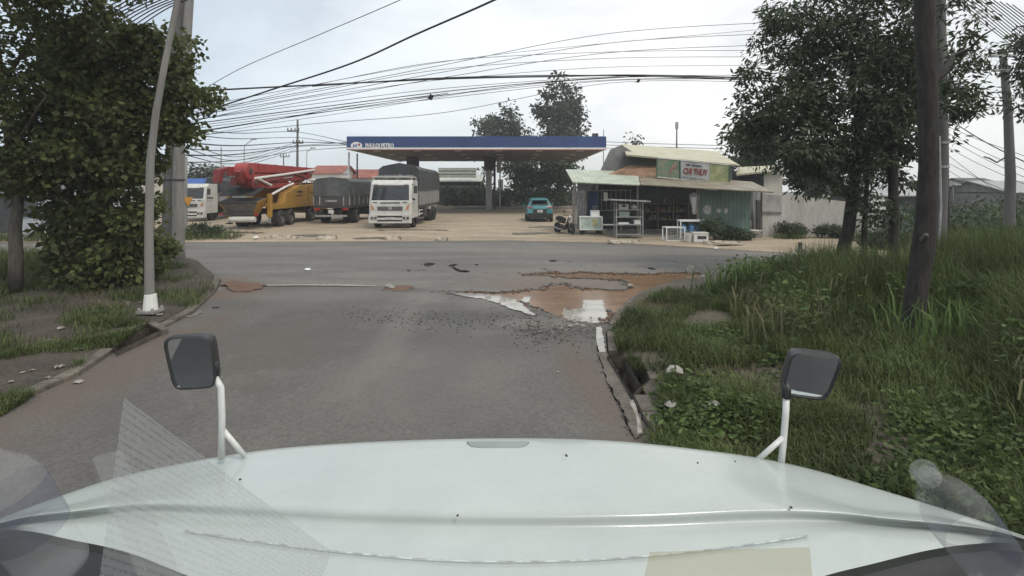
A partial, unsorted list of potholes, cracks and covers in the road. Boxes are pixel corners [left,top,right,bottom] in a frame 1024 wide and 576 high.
crack [597,348,633,437]
drain grate [607,355,657,400]
pothole [457,271,703,324]
